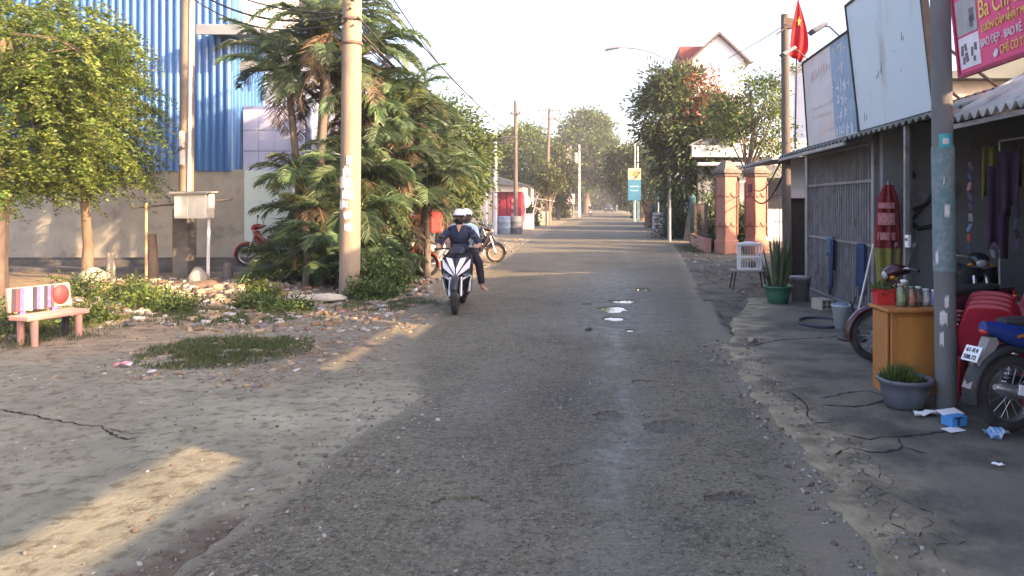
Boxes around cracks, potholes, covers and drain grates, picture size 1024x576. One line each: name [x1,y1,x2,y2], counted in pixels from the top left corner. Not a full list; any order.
pothole [580,408,636,426]
crack [753,368,972,556]
pothole [591,305,635,314]
crack [0,409,153,440]
pothole [414,491,505,515]
pothole [689,486,773,511]
pothole [632,417,709,439]
